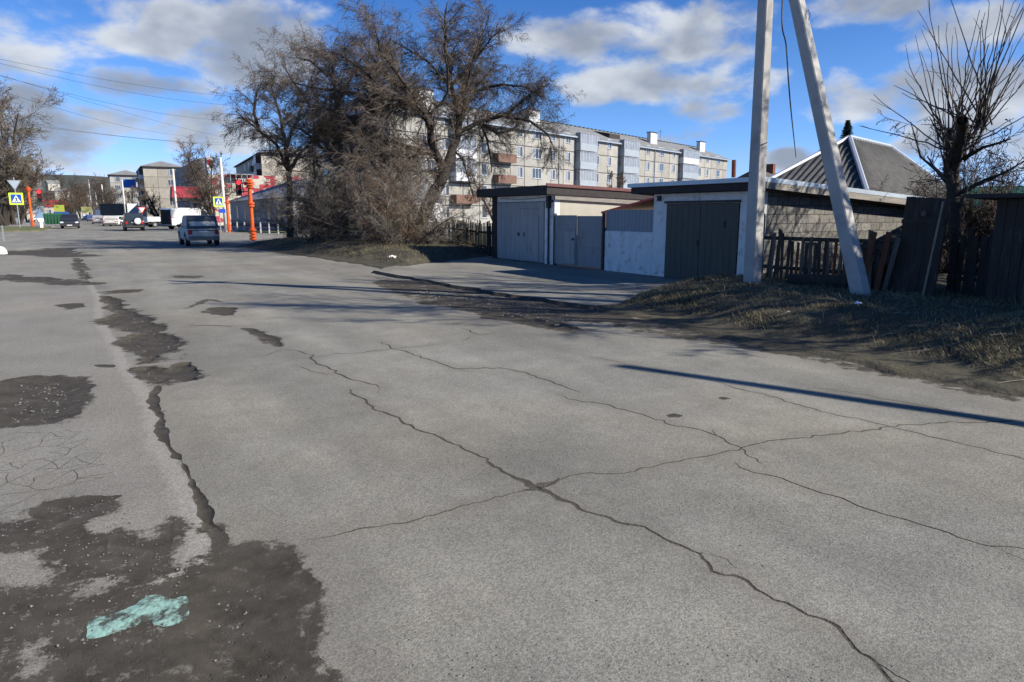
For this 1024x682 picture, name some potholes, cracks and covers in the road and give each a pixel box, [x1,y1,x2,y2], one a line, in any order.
crack [0,430,113,514]
crack [260,341,1024,682]
